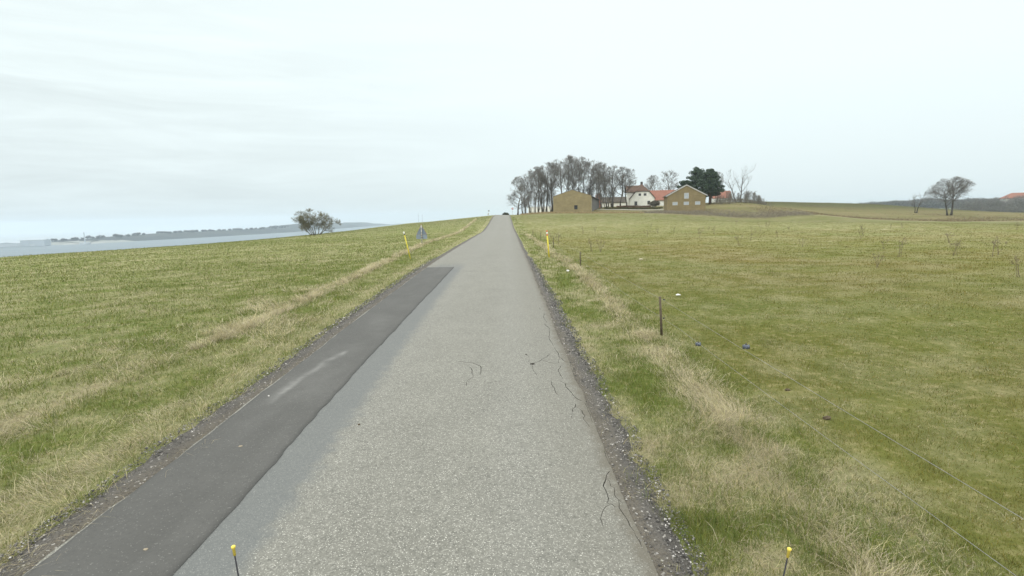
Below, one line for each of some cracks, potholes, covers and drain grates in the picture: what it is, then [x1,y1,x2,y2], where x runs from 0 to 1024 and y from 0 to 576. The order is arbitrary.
crack [527,316,592,423]
crack [600,451,642,547]
